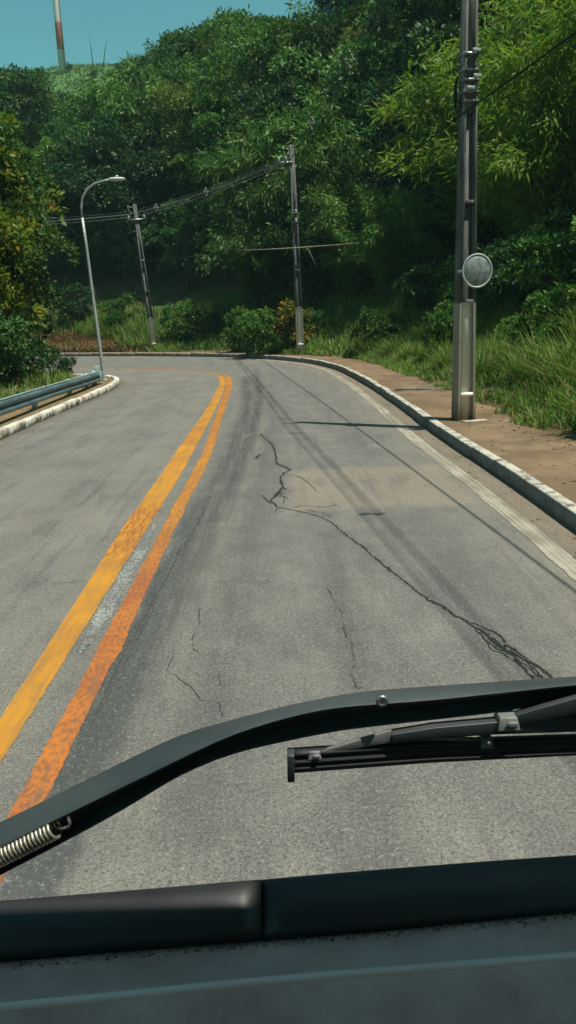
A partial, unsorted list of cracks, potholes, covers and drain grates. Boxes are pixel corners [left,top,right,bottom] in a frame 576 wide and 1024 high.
crack [255,434,553,679]
crack [167,656,224,716]
